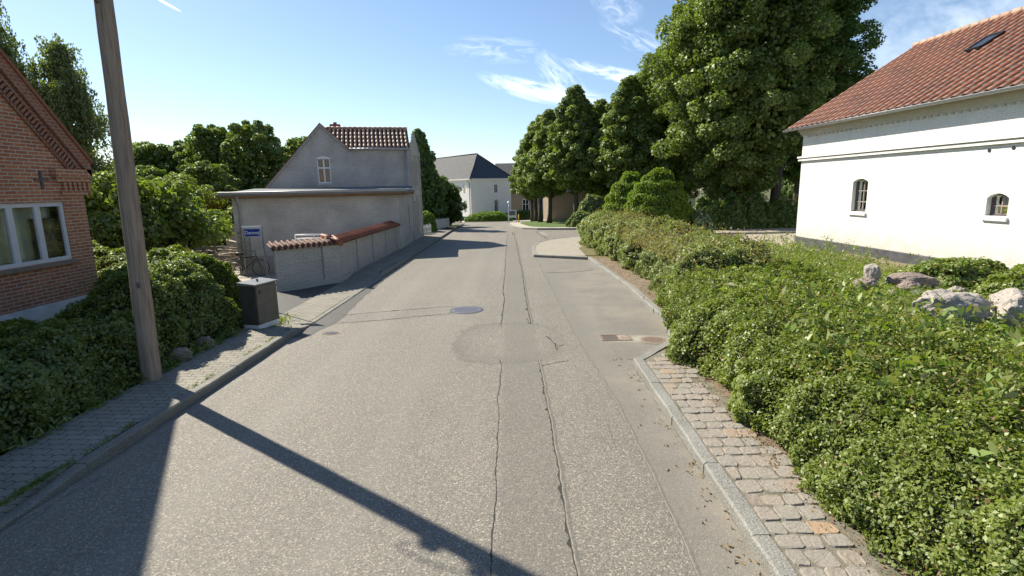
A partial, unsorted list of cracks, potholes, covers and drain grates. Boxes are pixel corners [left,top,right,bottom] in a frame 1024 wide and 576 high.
crack [501,231,588,576]
manhole cover [450,306,483,314]
crack [490,359,502,576]
manhole cover [639,336,667,344]
